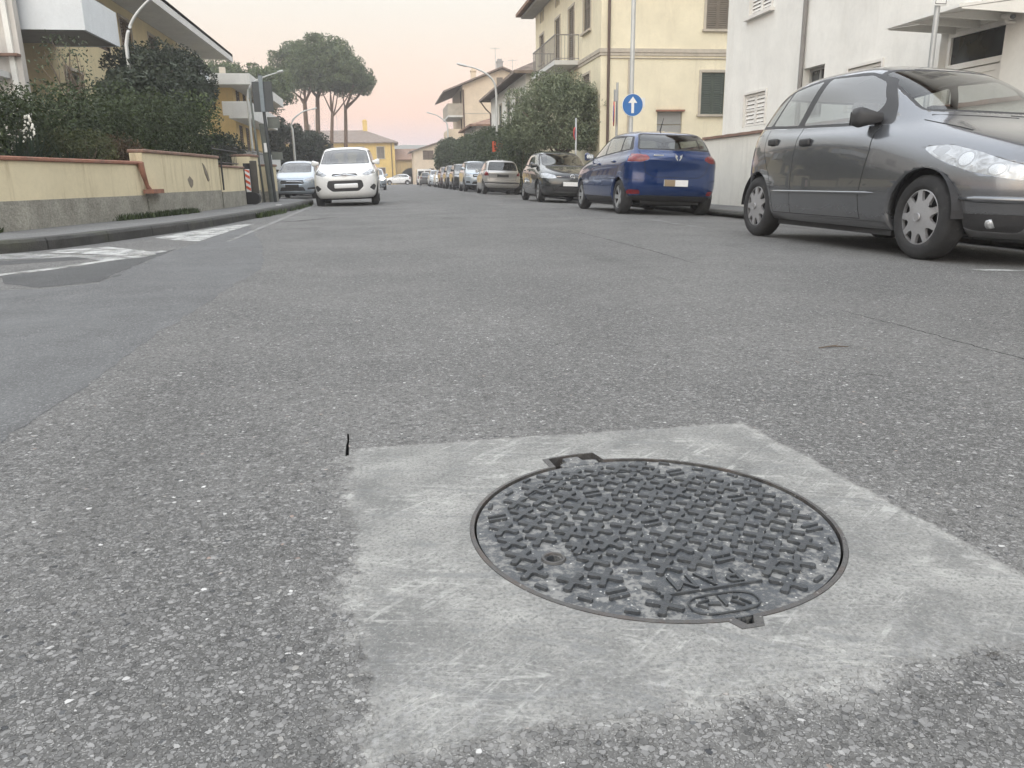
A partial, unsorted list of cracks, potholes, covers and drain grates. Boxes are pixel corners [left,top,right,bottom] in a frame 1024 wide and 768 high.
manhole cover [470,452,849,629]
crack [820,305,1024,359]
